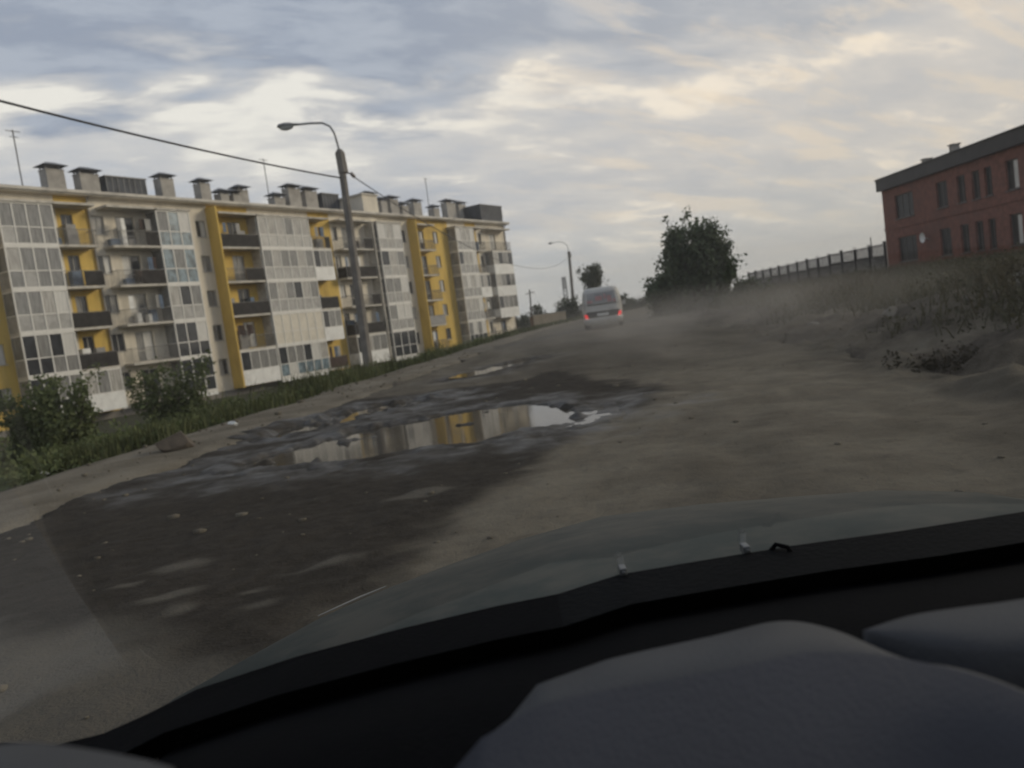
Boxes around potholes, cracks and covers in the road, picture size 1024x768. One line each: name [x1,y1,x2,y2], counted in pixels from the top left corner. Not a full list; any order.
pothole [201,399,629,478]
pothole [441,356,550,382]
